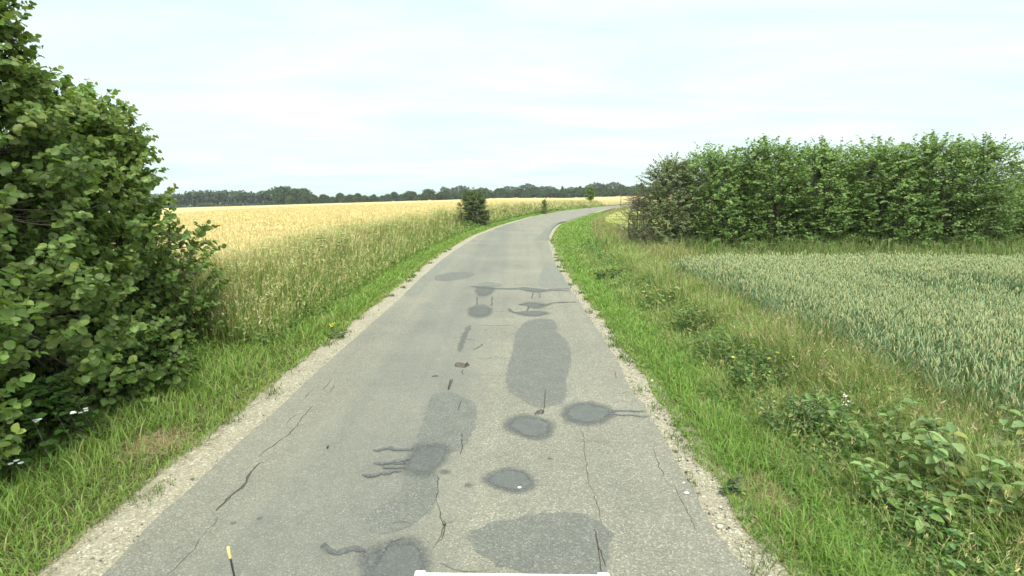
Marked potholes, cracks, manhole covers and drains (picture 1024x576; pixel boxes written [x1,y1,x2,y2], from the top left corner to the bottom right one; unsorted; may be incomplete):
crack [168,379,335,574]
crack [433,475,478,572]
crack [653,445,697,532]
crack [575,429,608,572]
